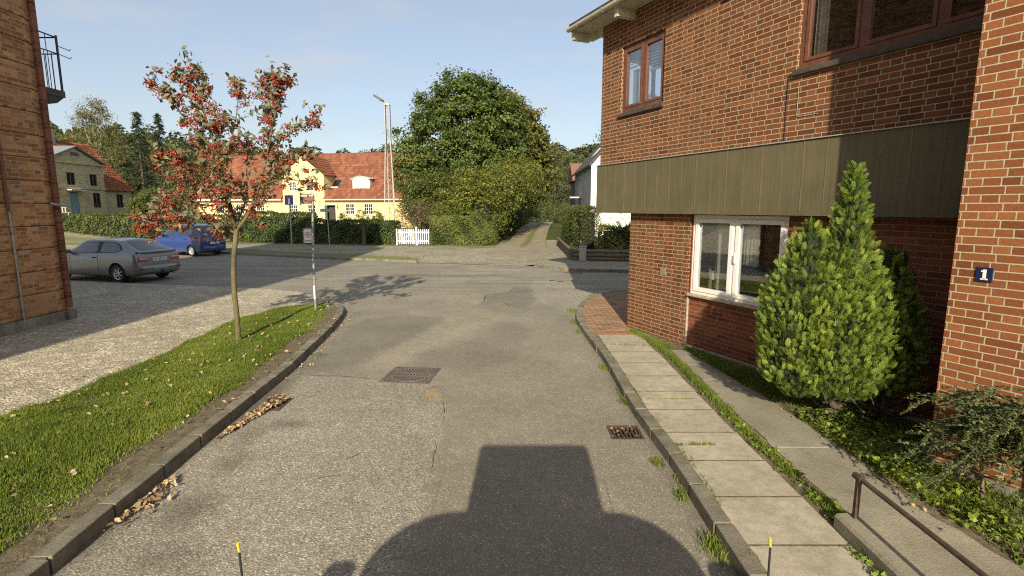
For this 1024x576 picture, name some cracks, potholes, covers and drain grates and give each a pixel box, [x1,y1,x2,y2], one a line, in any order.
drain grate [606,425,645,439]
